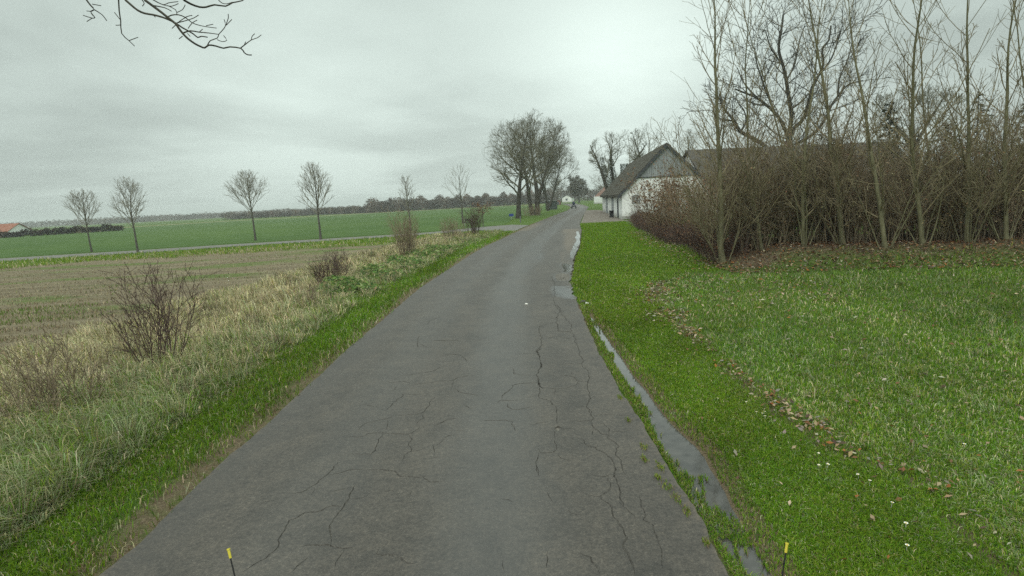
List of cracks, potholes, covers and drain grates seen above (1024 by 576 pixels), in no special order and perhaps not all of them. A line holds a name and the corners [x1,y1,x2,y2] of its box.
crack [484,268,663,574]
crack [241,317,474,575]
